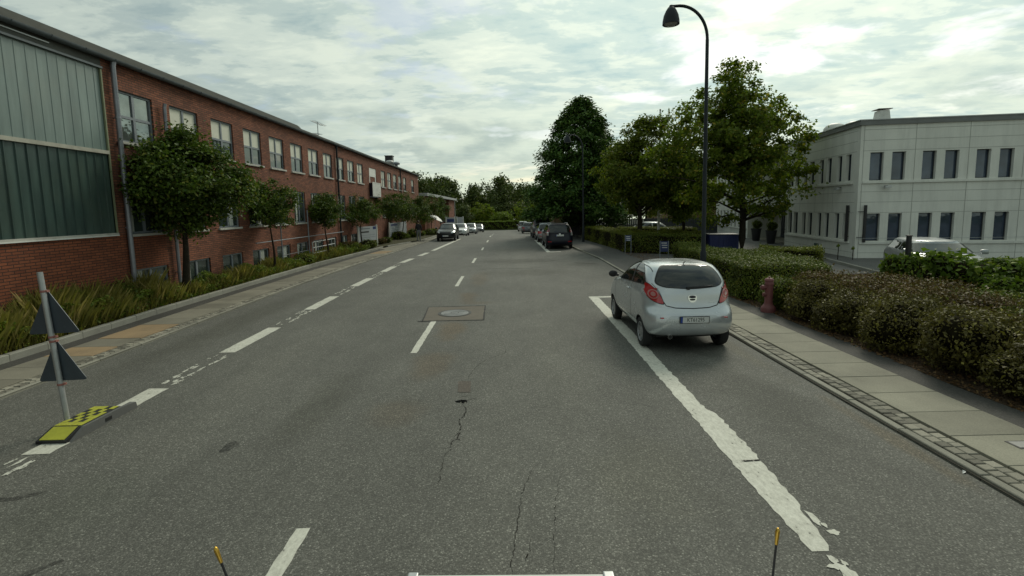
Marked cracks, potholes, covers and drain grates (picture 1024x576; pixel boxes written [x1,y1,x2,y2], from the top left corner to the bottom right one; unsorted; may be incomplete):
crack [510,468,533,572]
crack [435,395,471,488]
manhole cover [438,309,471,317]
